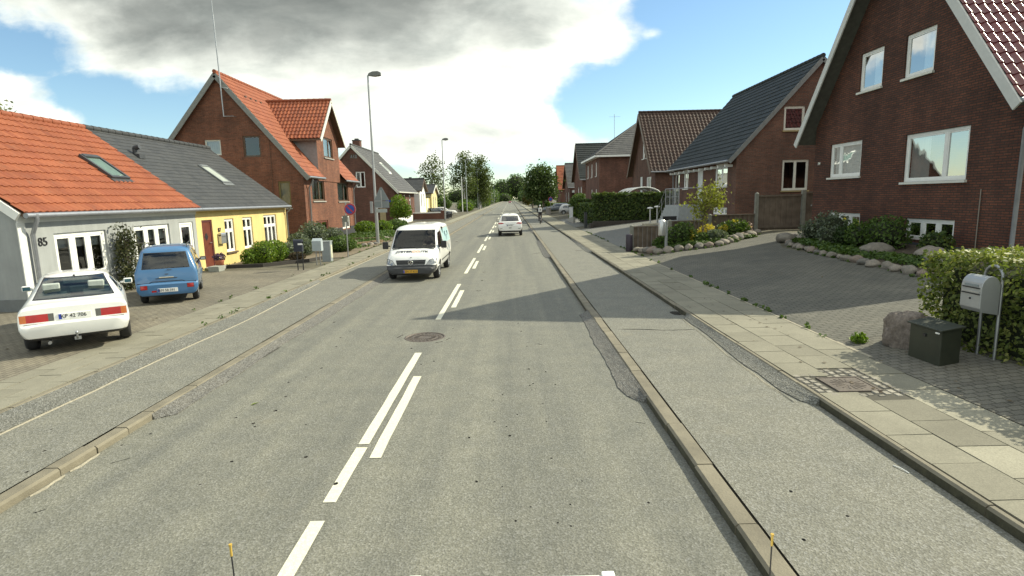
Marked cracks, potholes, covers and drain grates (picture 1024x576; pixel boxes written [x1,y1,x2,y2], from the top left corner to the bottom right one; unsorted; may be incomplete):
manhole cover [404,332,445,342]
manhole cover [815,376,883,392]
